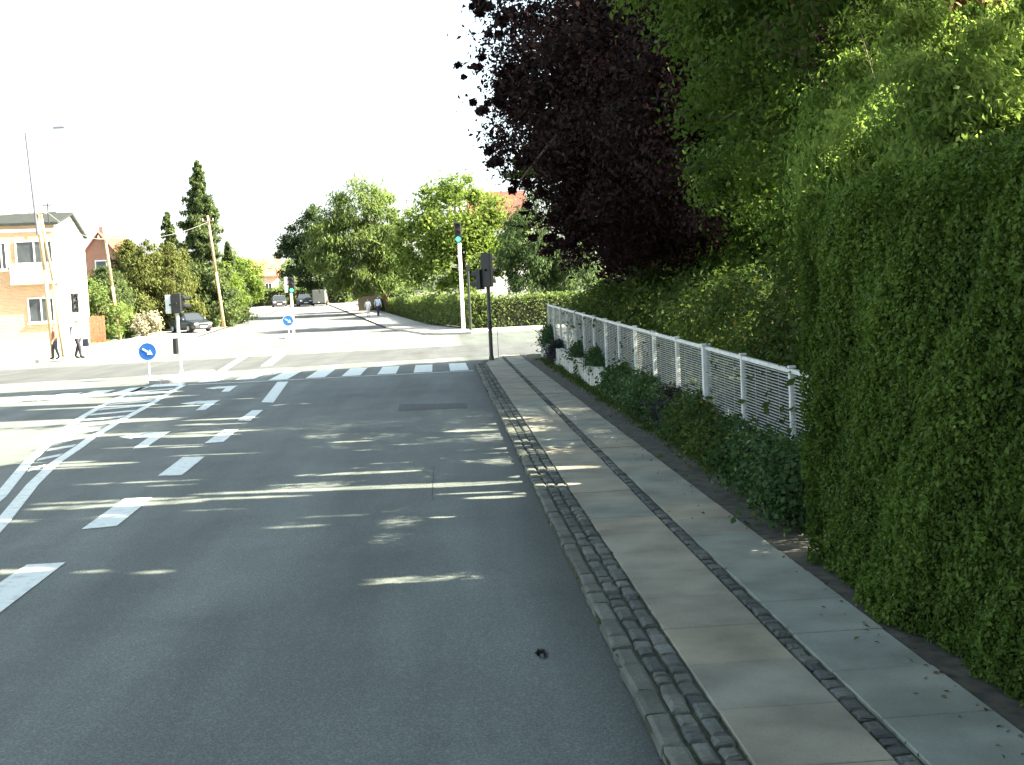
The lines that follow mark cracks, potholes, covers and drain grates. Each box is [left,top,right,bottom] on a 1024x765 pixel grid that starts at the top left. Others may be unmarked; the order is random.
pothole [534,648,548,660]
